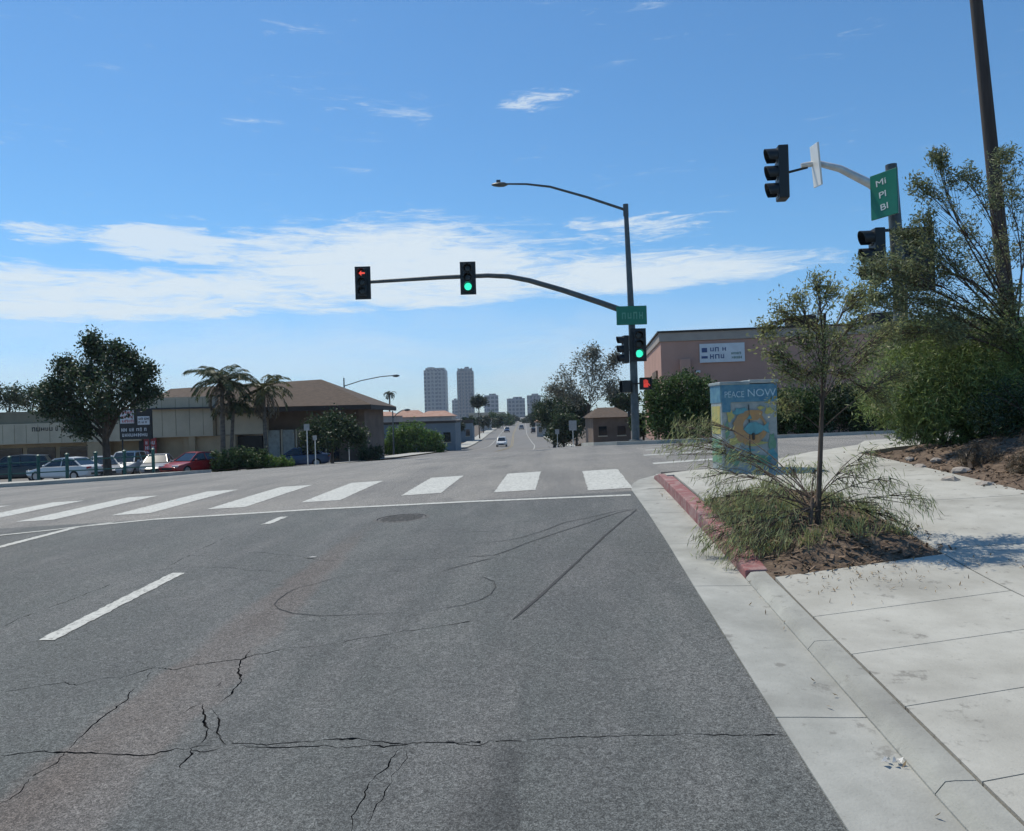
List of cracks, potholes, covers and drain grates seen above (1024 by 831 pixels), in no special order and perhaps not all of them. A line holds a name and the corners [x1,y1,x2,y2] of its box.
crack [0,621,778,831]
manhole cover [373,513,430,523]
